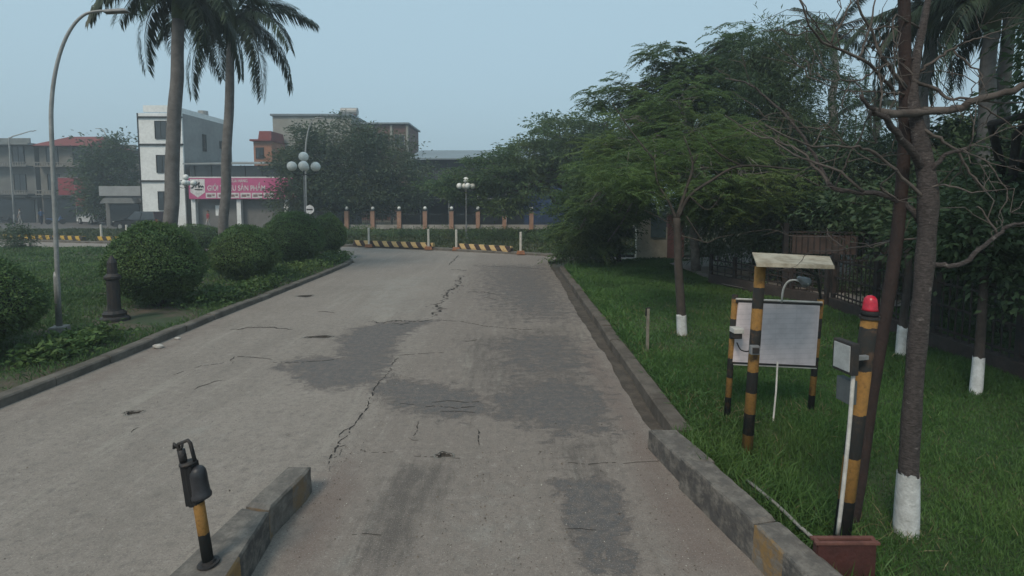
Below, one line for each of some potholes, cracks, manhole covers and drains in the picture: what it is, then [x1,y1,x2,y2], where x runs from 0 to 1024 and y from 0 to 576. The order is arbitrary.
pothole [433,451,455,459]
crack [371,400,478,457]
